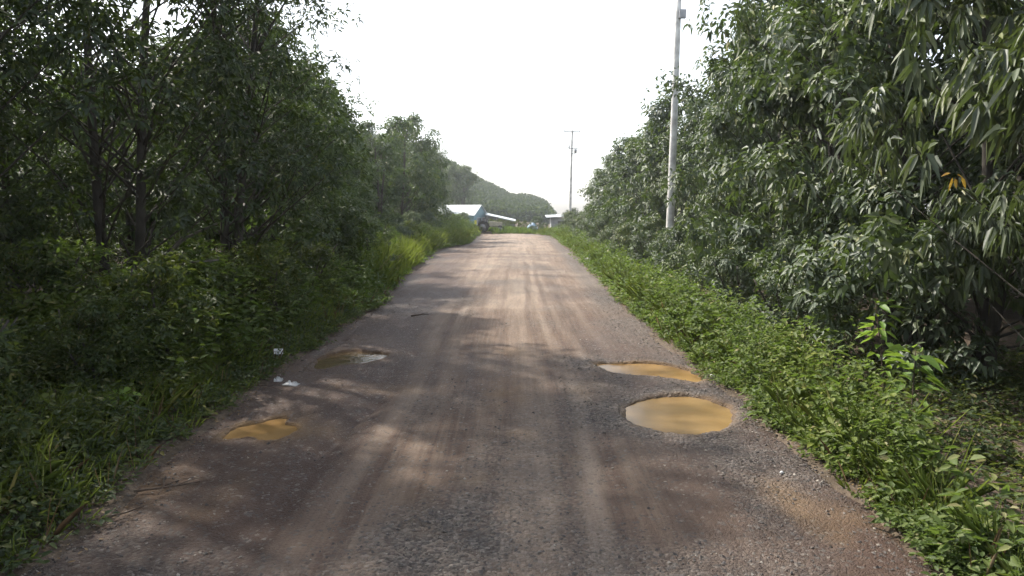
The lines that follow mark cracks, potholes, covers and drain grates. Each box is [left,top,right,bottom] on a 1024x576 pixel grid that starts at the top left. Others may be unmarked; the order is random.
pothole [211,412,306,443]
pothole [612,389,750,441]
pothole [583,359,717,384]
pothole [305,347,398,372]
